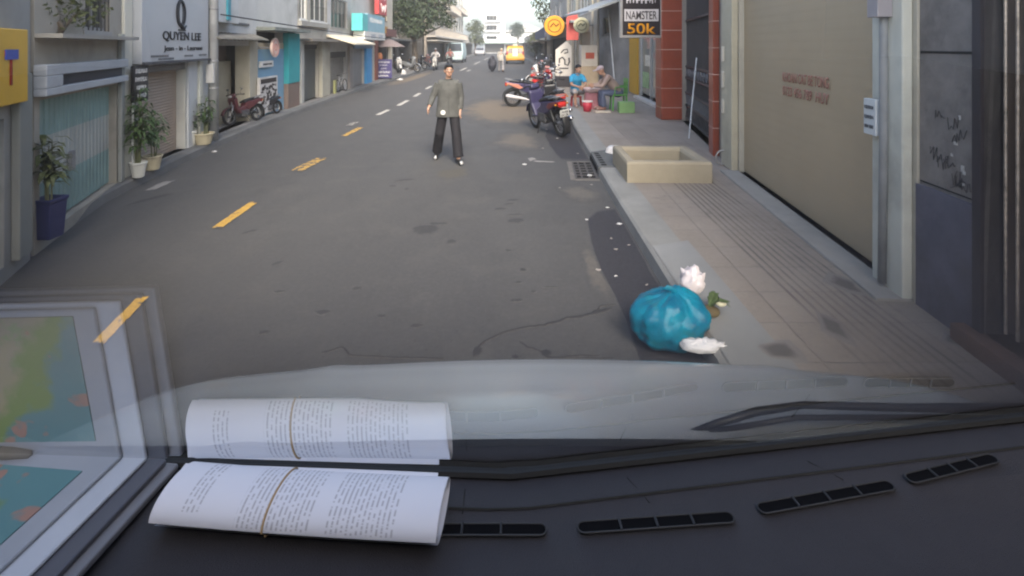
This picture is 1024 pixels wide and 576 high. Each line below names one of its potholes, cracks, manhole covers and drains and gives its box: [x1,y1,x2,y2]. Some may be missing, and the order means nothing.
drain grate [567,161,600,181]
drain grate [590,150,615,175]
crack [528,304,616,326]
